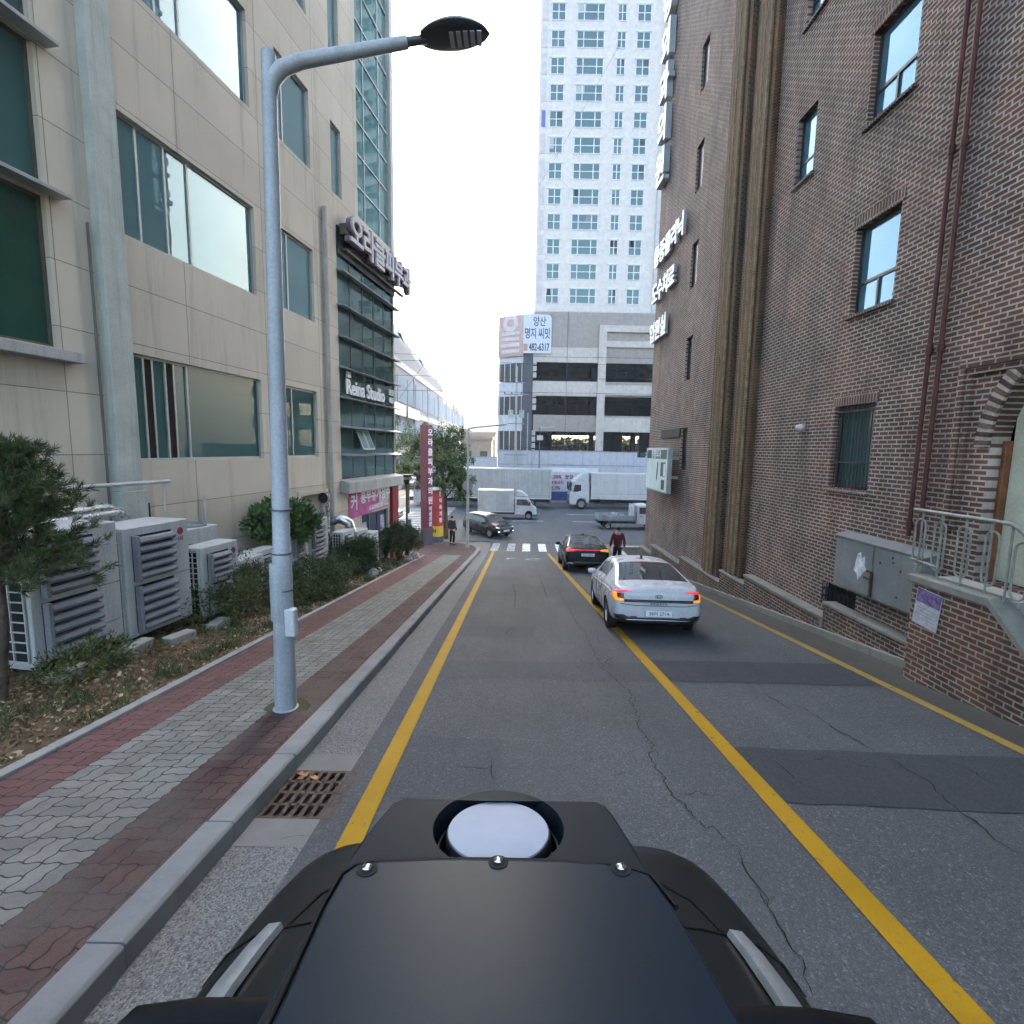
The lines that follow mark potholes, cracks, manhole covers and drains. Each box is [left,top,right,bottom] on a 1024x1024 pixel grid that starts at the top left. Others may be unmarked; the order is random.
crack [890,758,1024,857]
drain grate [256,770,359,819]
crack [557,588,820,1005]
